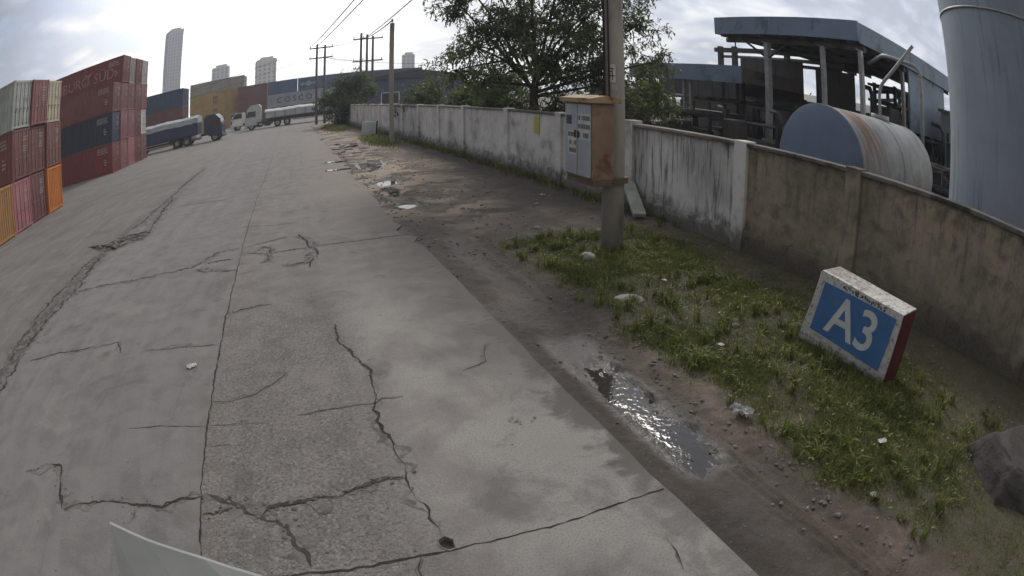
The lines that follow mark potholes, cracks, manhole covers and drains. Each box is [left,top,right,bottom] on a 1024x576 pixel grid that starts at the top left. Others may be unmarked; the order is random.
crack [0,168,320,392]
pothole [437,536,456,551]
crack [30,324,444,576]
crack [671,543,684,570]
crack [463,343,491,371]
